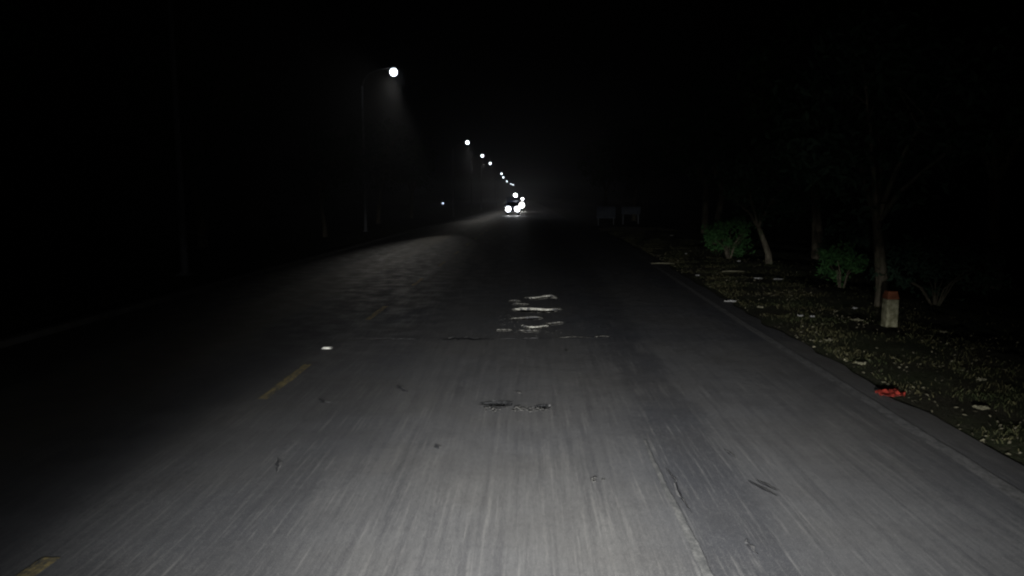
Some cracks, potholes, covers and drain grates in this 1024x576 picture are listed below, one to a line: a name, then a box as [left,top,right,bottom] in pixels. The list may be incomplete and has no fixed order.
crack [667,470,691,512]
